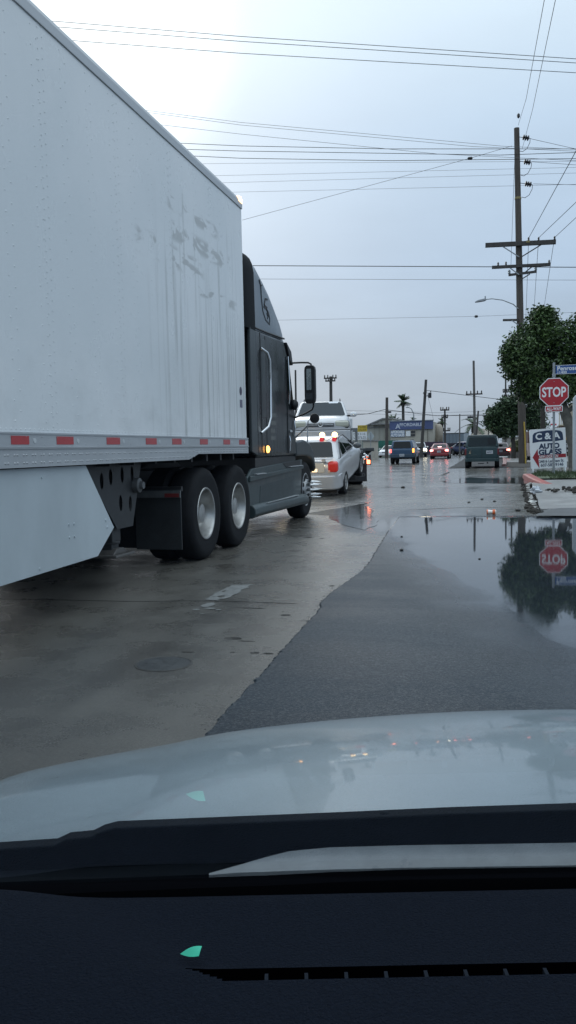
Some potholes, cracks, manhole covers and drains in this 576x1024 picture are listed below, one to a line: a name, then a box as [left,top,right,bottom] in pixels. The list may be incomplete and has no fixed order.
manhole cover [134,656,193,672]
